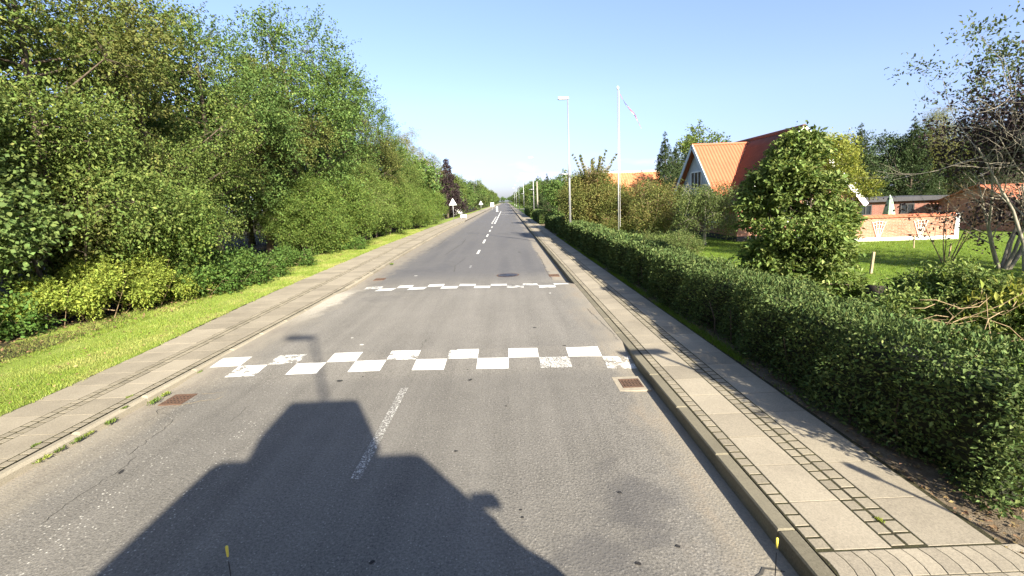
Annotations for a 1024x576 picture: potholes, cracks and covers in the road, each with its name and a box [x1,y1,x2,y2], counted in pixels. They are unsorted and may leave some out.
drain grate [158,394,197,406]
drain grate [612,376,652,391]
